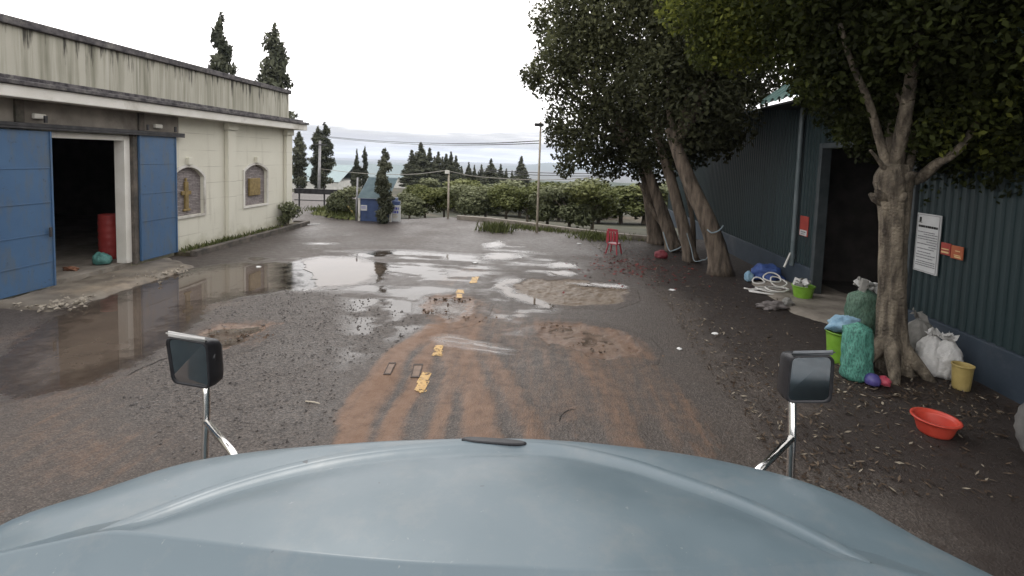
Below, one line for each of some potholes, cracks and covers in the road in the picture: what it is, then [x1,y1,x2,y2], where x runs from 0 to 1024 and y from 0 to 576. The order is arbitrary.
pothole [505,277,641,310]
pothole [411,292,494,329]
pothole [183,317,288,355]
pothole [518,318,664,368]
